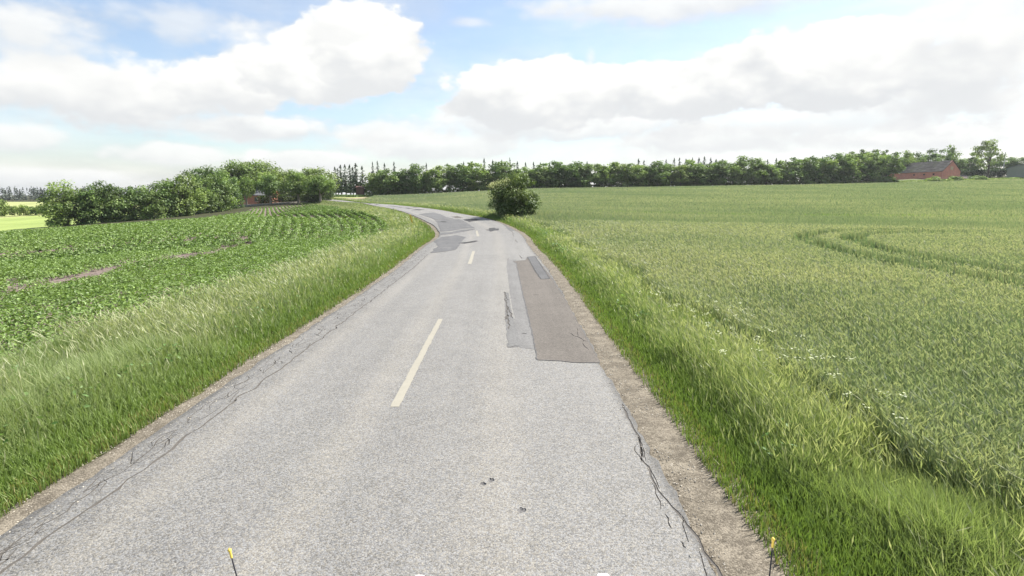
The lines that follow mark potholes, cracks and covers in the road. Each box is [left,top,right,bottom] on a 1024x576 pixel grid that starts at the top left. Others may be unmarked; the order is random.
crack [622,404,723,576]
crack [0,247,432,574]
crack [504,292,526,347]
